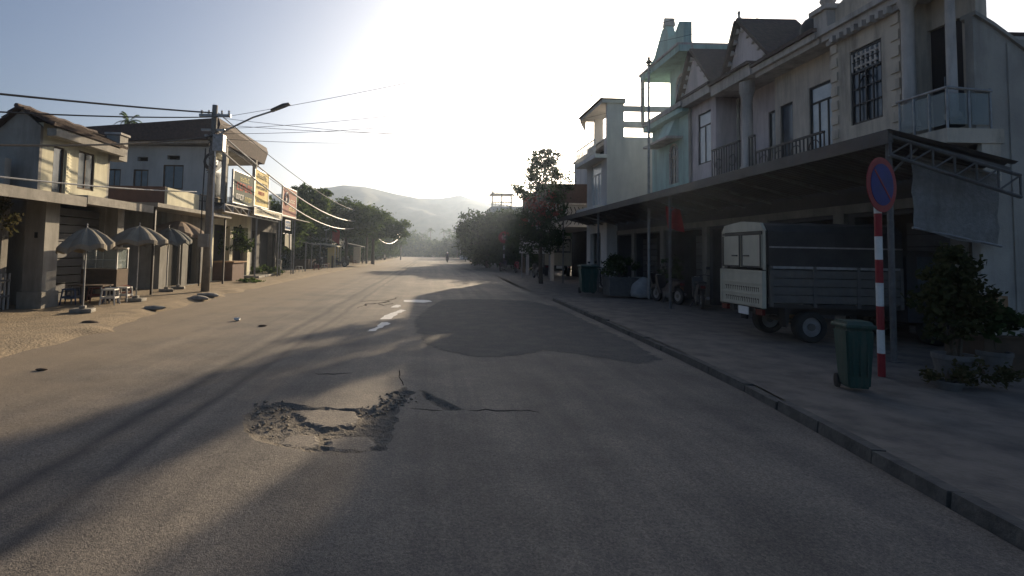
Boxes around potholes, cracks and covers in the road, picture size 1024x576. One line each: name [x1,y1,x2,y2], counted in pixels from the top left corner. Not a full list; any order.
pothole [242,387,417,455]
